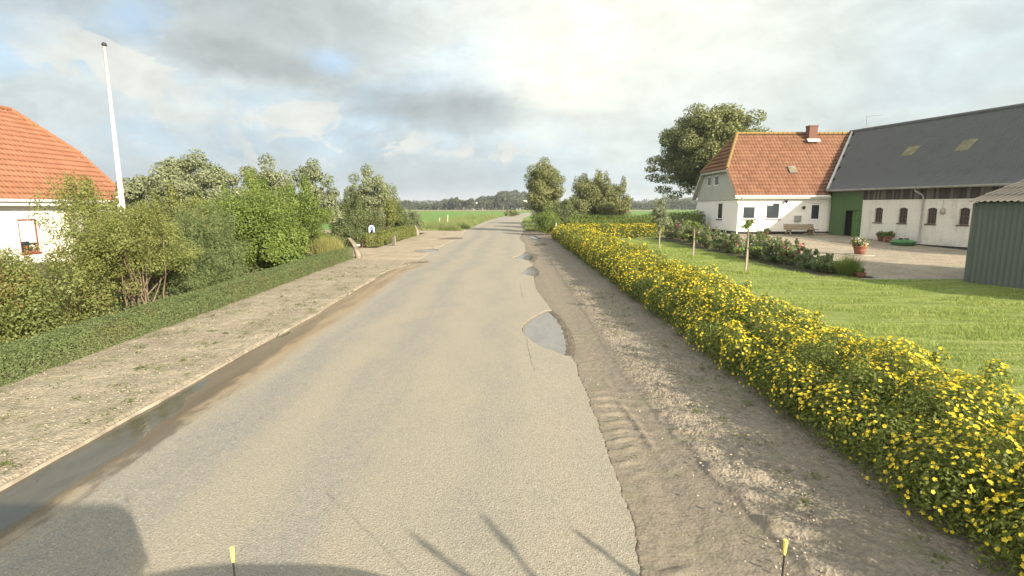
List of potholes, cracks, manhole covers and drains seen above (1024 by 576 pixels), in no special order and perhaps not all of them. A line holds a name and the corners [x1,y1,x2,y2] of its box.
pothole [515,252,538,262]
pothole [524,311,576,357]
pothole [522,266,539,276]
